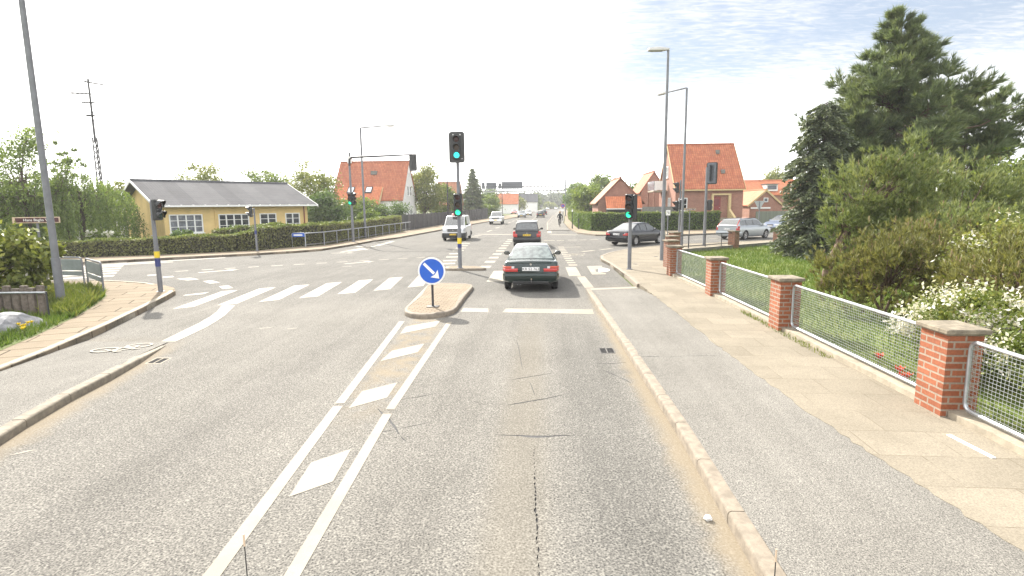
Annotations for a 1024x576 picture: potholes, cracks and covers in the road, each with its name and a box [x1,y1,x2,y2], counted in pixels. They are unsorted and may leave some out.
crack [510,340,561,405]
crack [378,409,425,442]
